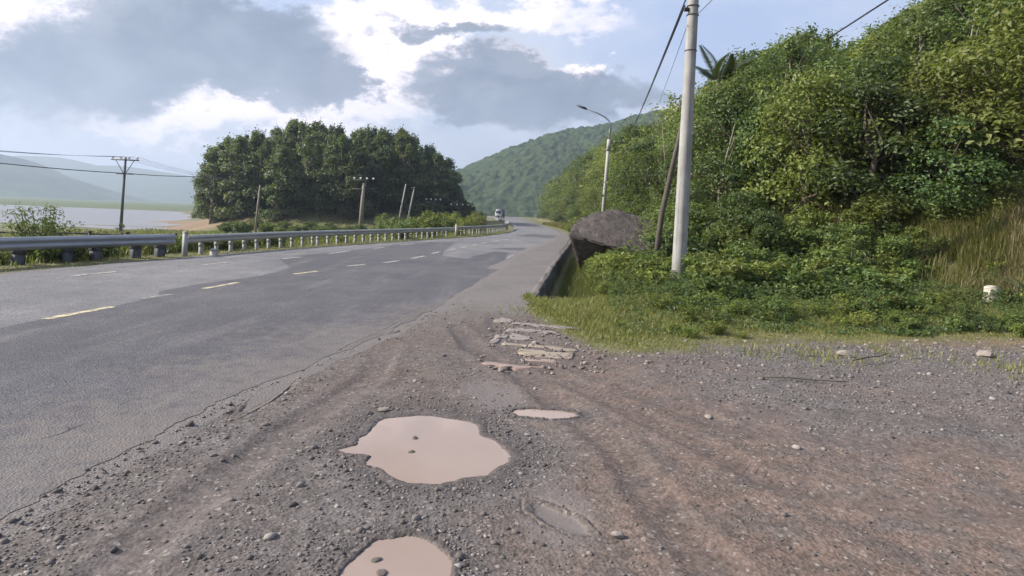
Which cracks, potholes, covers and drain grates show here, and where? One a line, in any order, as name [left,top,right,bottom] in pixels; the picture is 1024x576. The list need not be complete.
pothole [323,408,528,491]
pothole [521,497,603,541]
pothole [506,407,584,421]
pothole [329,528,462,576]
